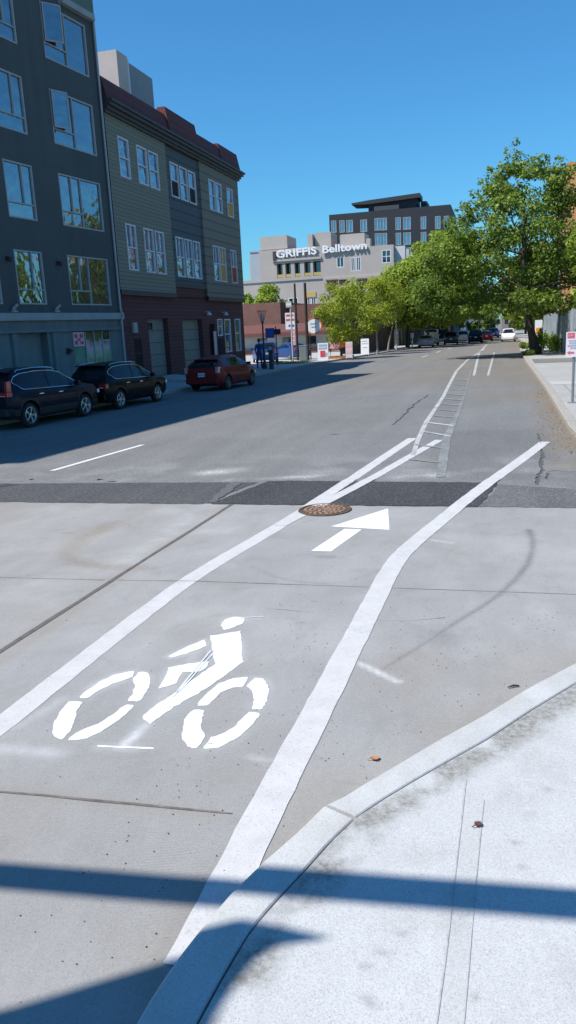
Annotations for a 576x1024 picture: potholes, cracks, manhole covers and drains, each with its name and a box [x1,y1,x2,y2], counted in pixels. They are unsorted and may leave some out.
manhole cover [298,503,352,516]
crack [497,425,568,485]
crack [378,394,429,426]
